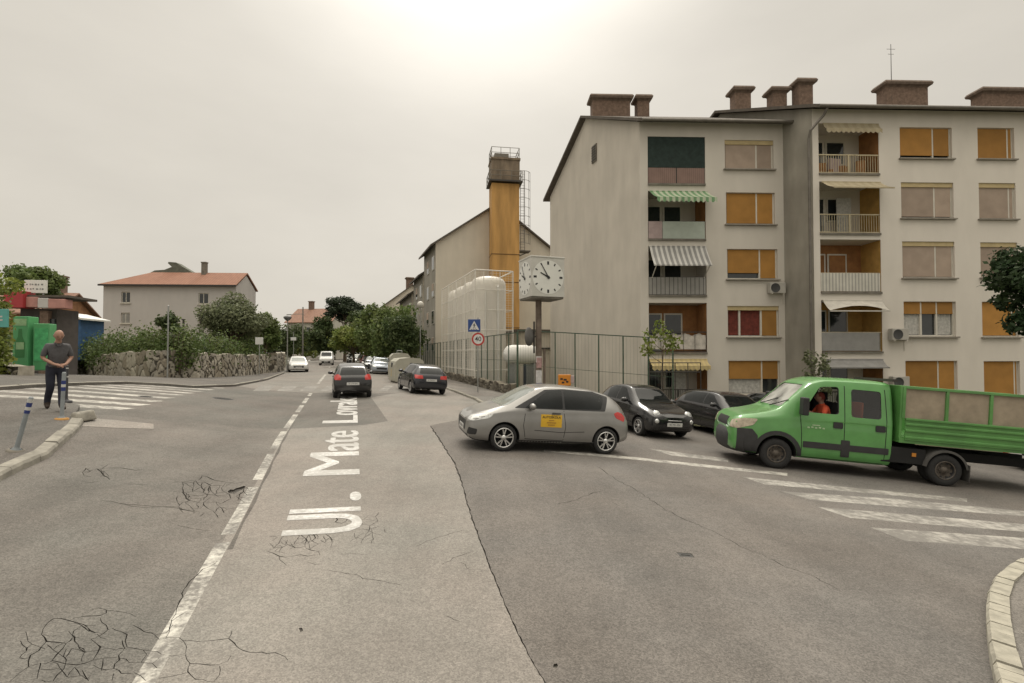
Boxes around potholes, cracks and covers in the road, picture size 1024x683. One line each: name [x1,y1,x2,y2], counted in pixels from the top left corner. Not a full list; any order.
crack [13,564,288,682]
crack [82,465,251,531]
crack [268,514,385,565]
